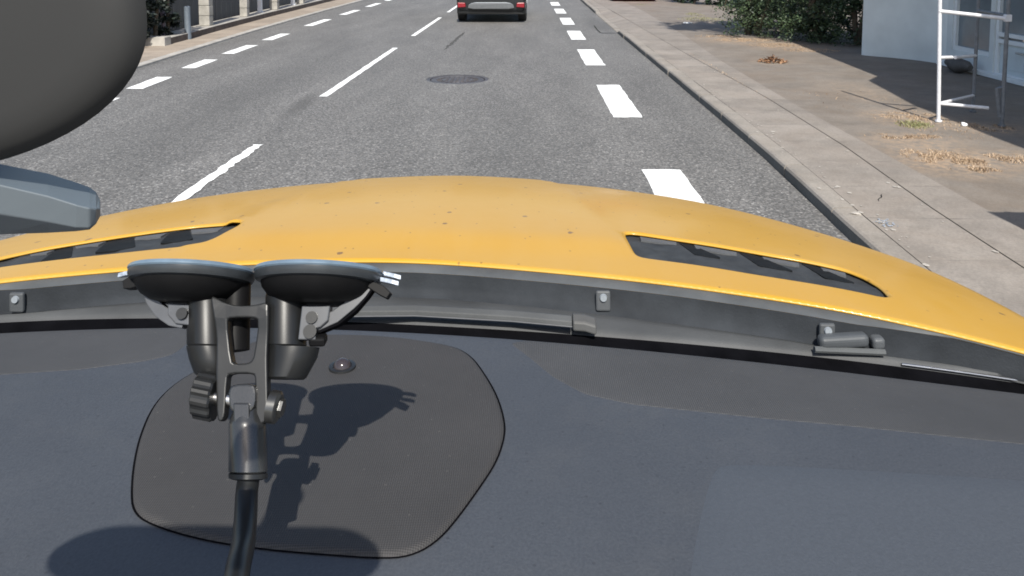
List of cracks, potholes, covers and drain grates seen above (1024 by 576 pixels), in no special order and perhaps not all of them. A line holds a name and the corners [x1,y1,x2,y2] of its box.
manhole cover [426,75,489,84]
